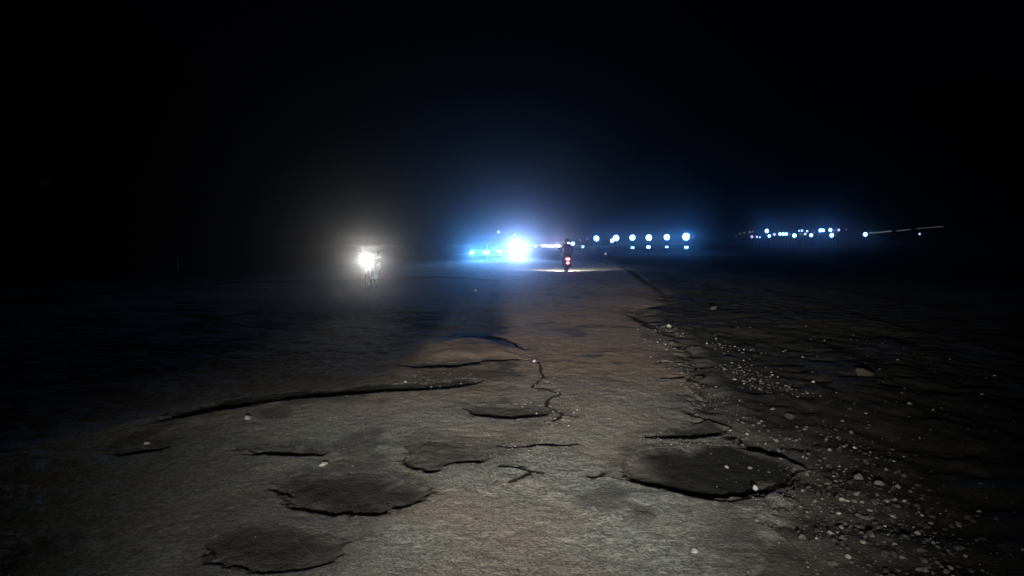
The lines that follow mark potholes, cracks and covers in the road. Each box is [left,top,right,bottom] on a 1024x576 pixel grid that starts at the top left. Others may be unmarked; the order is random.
pothole [269,473,436,517]
